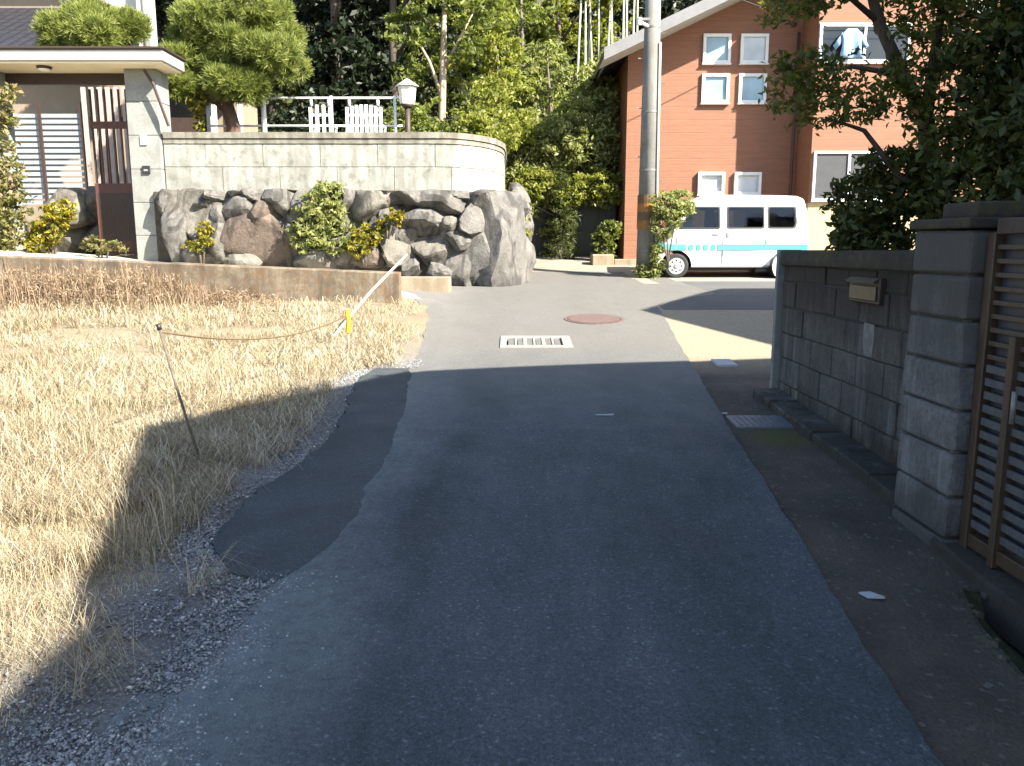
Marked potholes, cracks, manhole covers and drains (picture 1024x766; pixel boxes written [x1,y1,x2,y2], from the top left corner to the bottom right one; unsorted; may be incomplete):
manhole cover [564,314,624,325]
utility cover [711,359,738,367]
drain grate [500,336,573,348]
